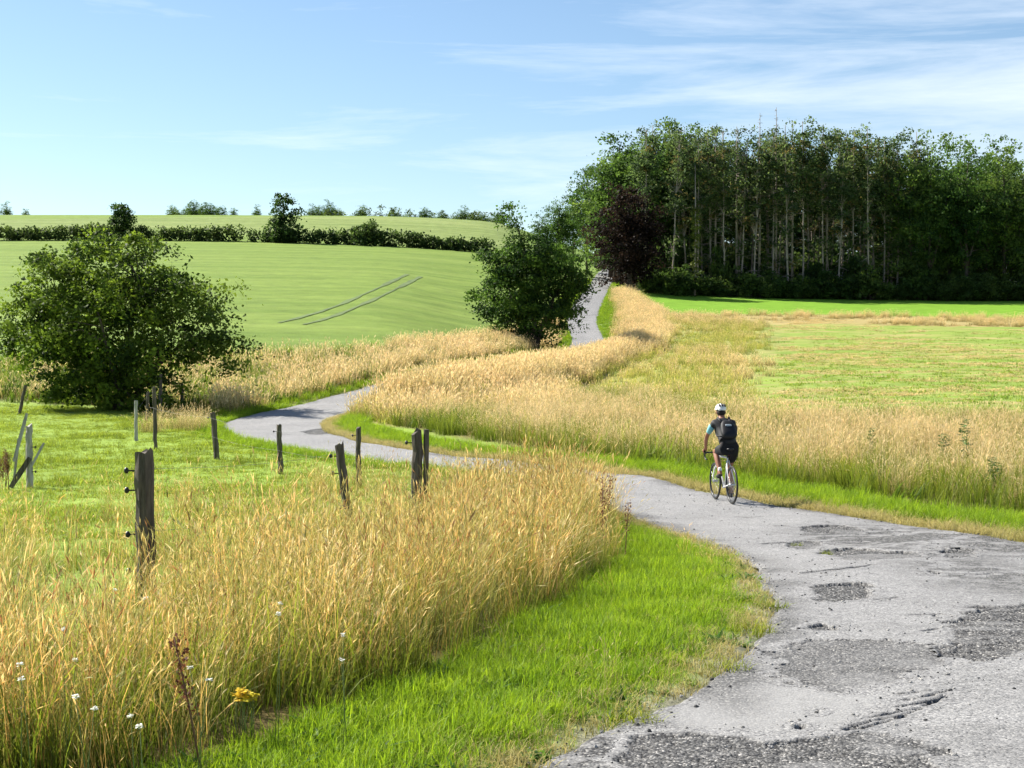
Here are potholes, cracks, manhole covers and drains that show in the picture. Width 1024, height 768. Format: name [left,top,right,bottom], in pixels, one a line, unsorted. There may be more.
pothole [804,581,889,603]
pothole [927,602,1024,665]
pothole [933,547,985,558]
pothole [592,728,967,768]
pothole [793,524,874,535]
crack [791,564,883,574]
pothole [812,547,929,561]
